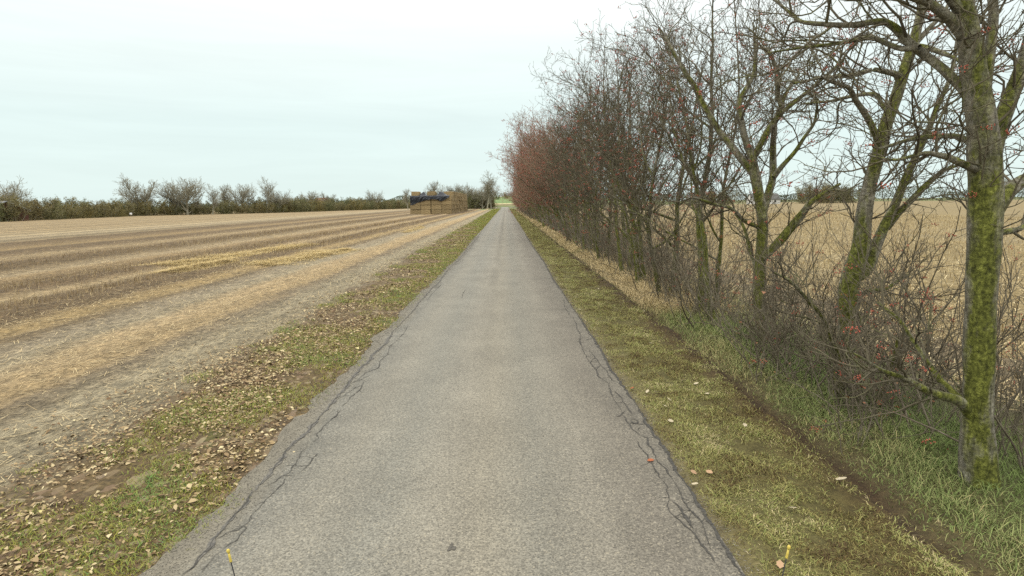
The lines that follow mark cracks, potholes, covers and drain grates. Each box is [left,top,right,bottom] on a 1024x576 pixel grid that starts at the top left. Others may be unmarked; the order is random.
crack [525,234,746,576]
crack [184,235,479,573]
